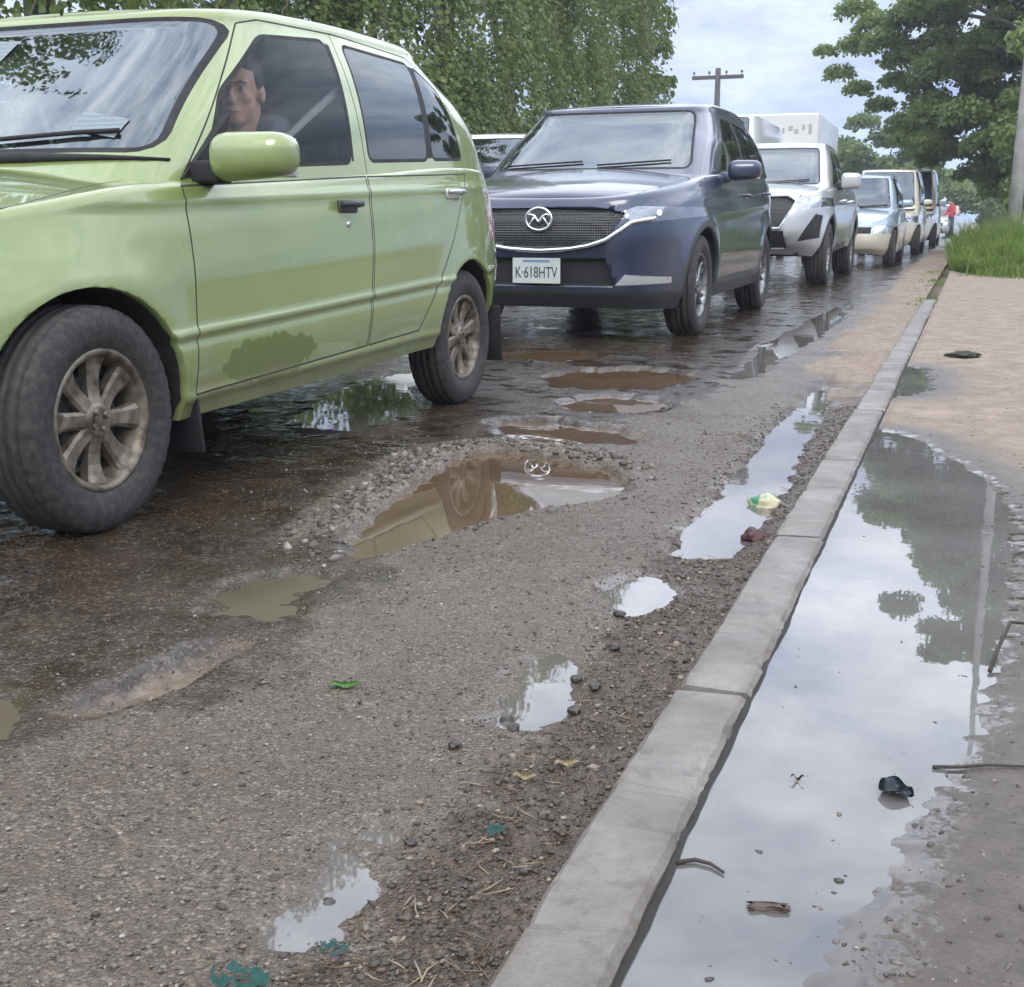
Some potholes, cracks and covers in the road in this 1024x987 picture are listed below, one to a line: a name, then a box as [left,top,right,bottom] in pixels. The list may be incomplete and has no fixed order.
pothole [294,439,668,569]
pothole [467,414,667,448]
pothole [541,390,695,416]
pothole [176,563,362,638]
pothole [720,306,853,381]
pothole [510,365,725,393]
